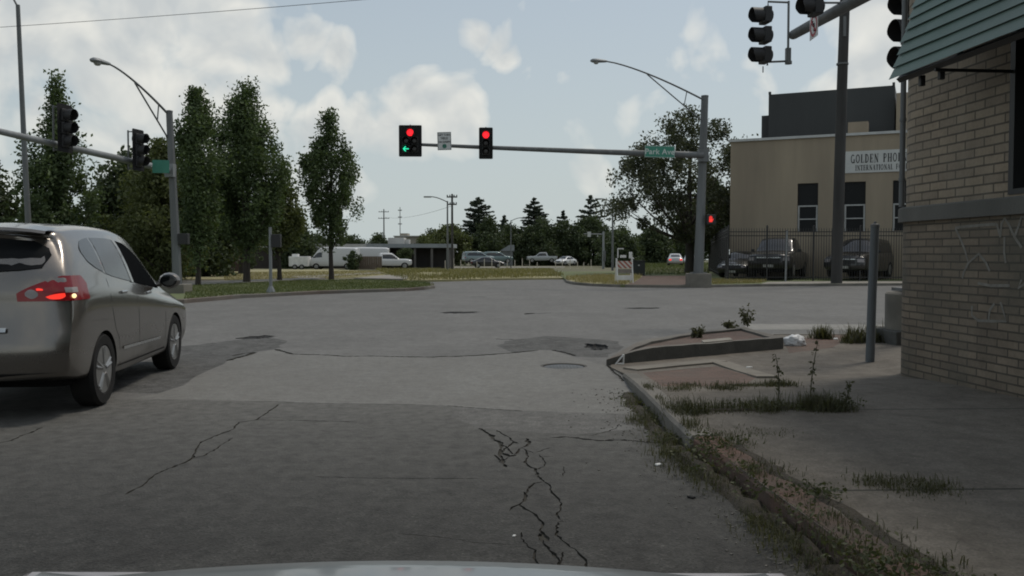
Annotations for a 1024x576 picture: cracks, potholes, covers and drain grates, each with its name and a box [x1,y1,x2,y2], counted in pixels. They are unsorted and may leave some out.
crack [126,404,279,494]
crack [316,428,588,567]
